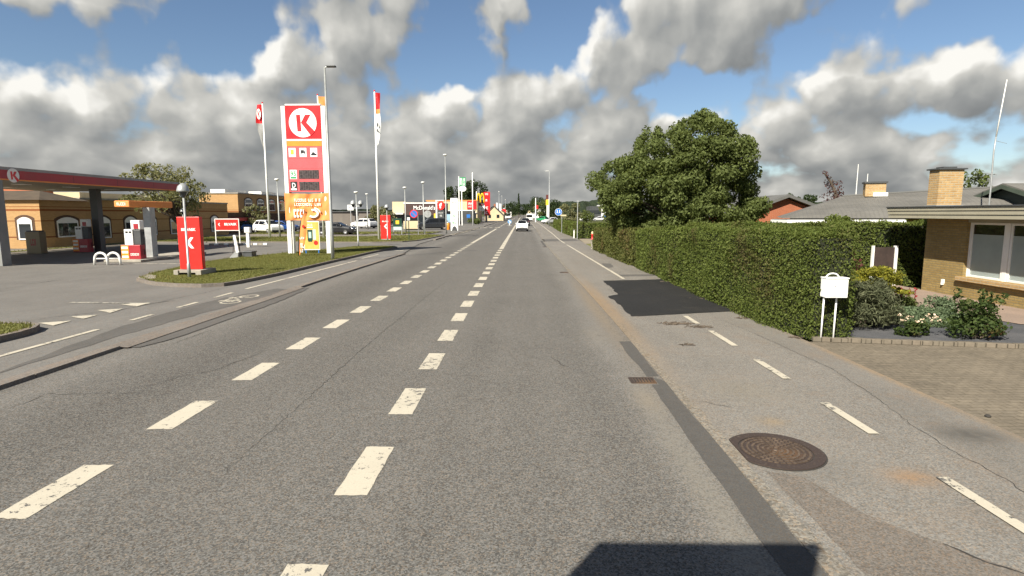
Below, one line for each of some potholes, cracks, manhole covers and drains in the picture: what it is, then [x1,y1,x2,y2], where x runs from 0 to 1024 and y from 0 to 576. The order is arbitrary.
manhole cover [729,433,828,471]
